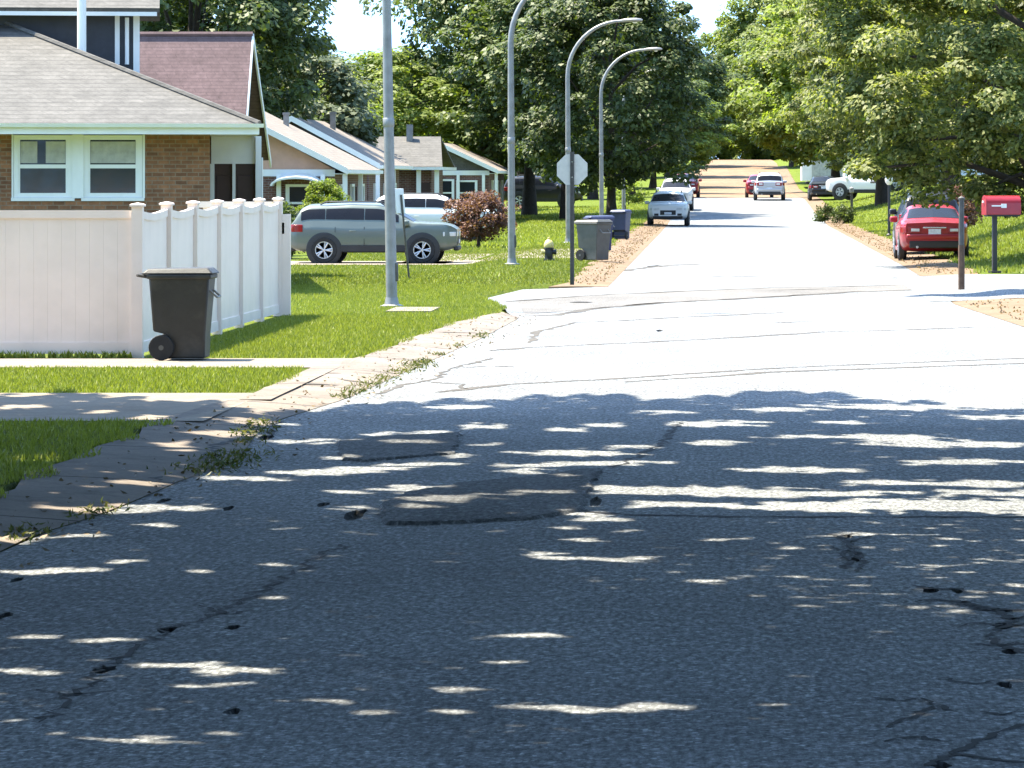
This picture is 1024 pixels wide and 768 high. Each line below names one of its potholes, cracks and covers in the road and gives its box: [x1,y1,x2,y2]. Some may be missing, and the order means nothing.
crack [913,585,1024,653]
crack [612,422,682,468]
crack [874,677,1024,766]
pothole [344,509,368,520]
crack [31,543,348,722]
crack [824,533,873,571]
crack [376,264,1024,394]
